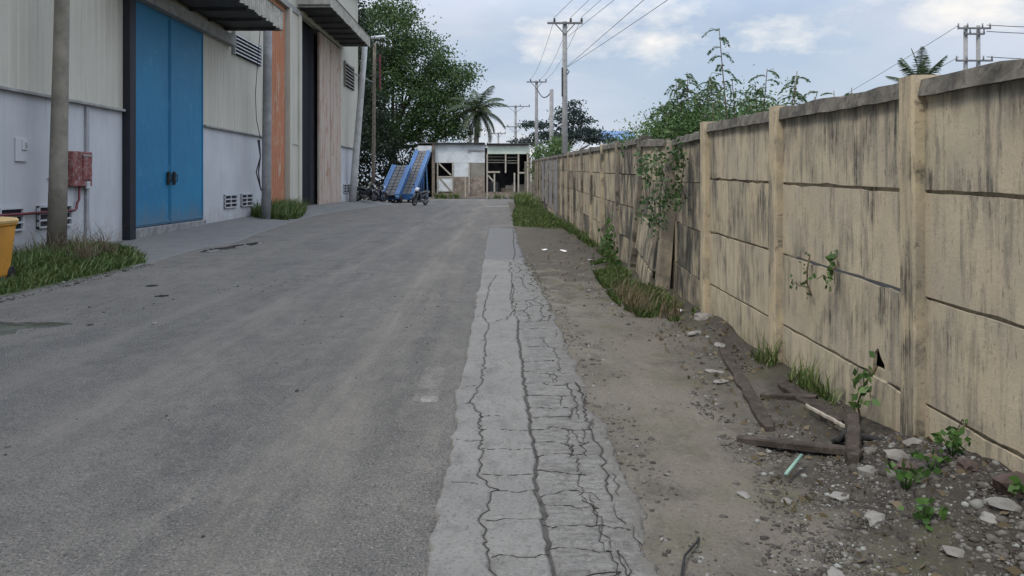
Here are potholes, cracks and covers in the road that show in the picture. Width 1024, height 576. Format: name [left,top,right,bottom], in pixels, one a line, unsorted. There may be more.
crack [496,261,552,323]
pothole [0,322,72,336]
crack [457,275,642,576]
